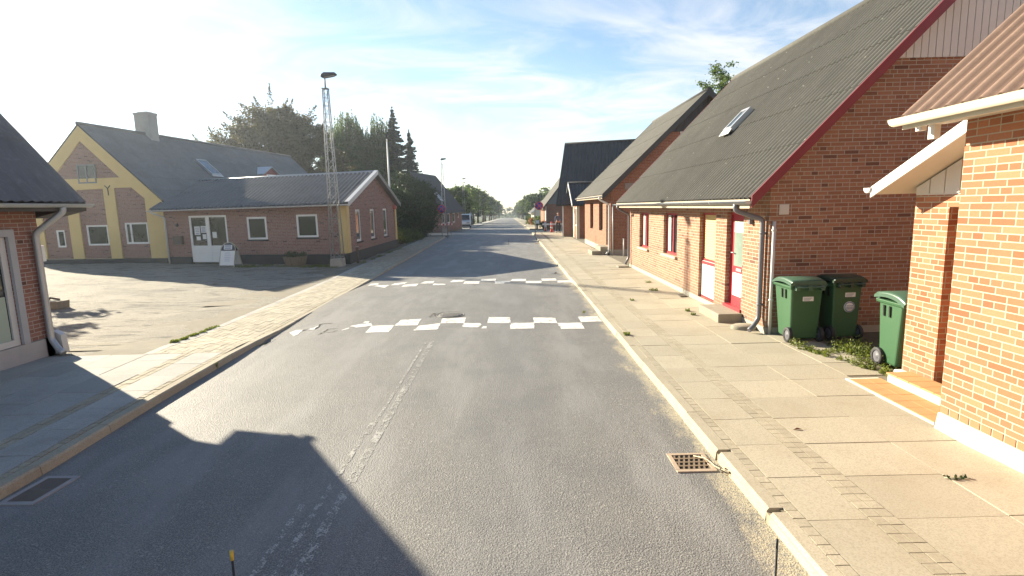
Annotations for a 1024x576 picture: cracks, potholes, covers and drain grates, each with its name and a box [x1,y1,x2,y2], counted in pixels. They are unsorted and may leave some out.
drain grate [666,453,718,473]
drain grate [0,476,81,506]
